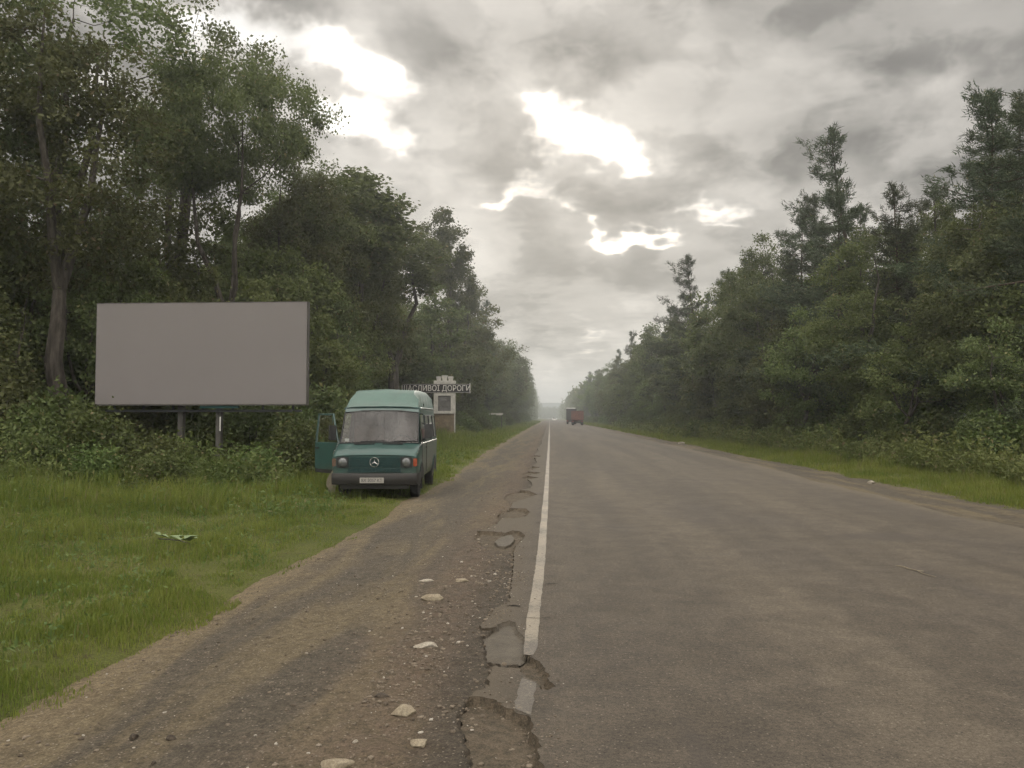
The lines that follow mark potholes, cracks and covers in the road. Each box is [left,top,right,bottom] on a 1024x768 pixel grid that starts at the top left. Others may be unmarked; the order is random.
pothole [476,531,525,554]
pothole [499,508,529,520]
pothole [505,490,537,504]
pothole [459,697,545,768]
pothole [483,621,527,667]
